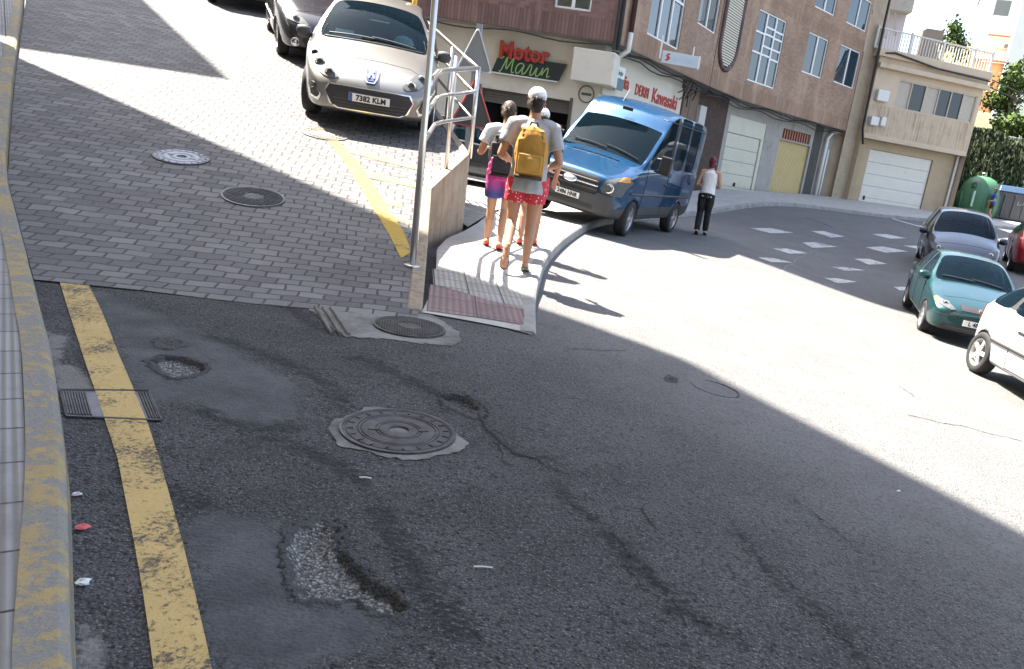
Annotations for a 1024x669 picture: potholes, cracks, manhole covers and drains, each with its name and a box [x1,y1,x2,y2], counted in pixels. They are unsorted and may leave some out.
manhole cover [328,407,469,460]
manhole cover [301,127,349,141]
crack [571,504,734,639]
pothole [141,354,212,381]
manhole cover [152,148,211,166]
pothole [276,514,421,624]
manhole cover [221,186,285,208]
pothole [435,391,488,419]
crack [478,413,564,473]
